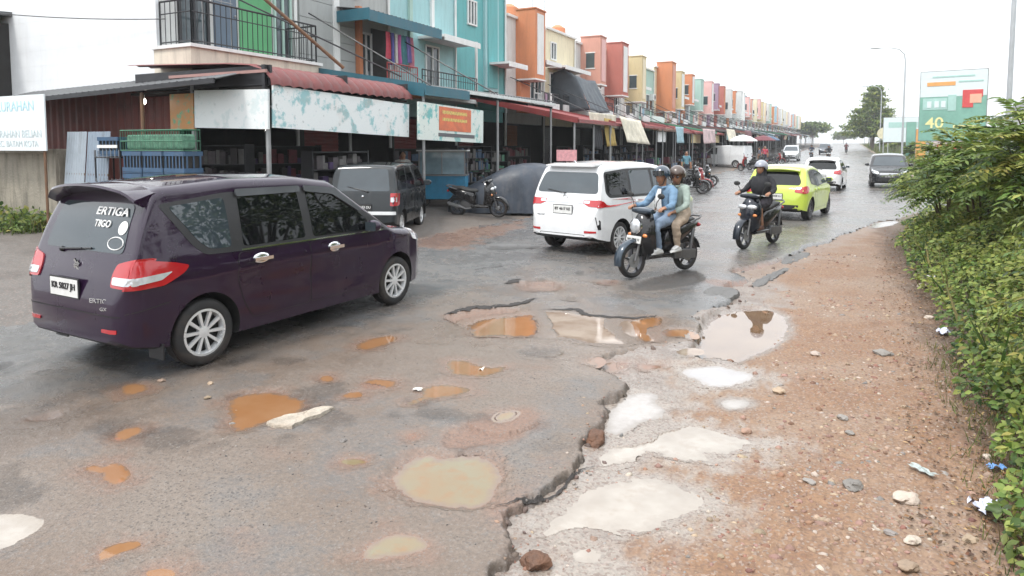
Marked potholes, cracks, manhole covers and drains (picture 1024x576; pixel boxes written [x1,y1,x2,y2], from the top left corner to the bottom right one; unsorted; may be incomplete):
pothole [208,386,323,436]
pothole [375,448,515,514]
pothole [529,309,645,348]
pothole [341,520,447,573]
pothole [438,357,516,380]
pothole [625,316,669,343]
pothole [76,530,163,572]
crack [491,465,595,507]
pothole [465,315,540,338]
pothole [64,455,151,493]
pothole [0,505,60,556]
